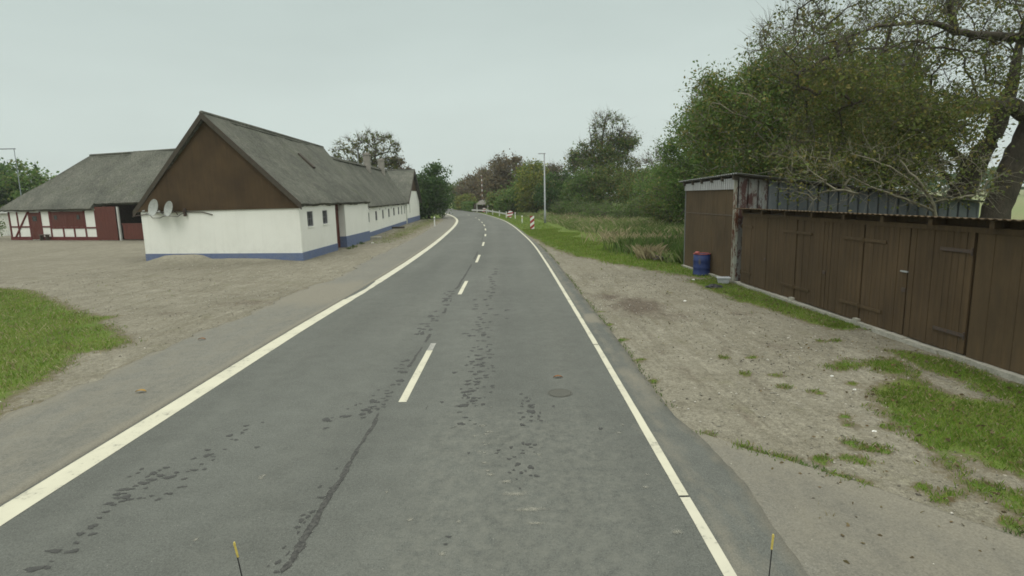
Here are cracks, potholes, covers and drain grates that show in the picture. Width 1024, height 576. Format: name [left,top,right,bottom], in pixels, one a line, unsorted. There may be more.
manhole cover [548,389,572,397]
